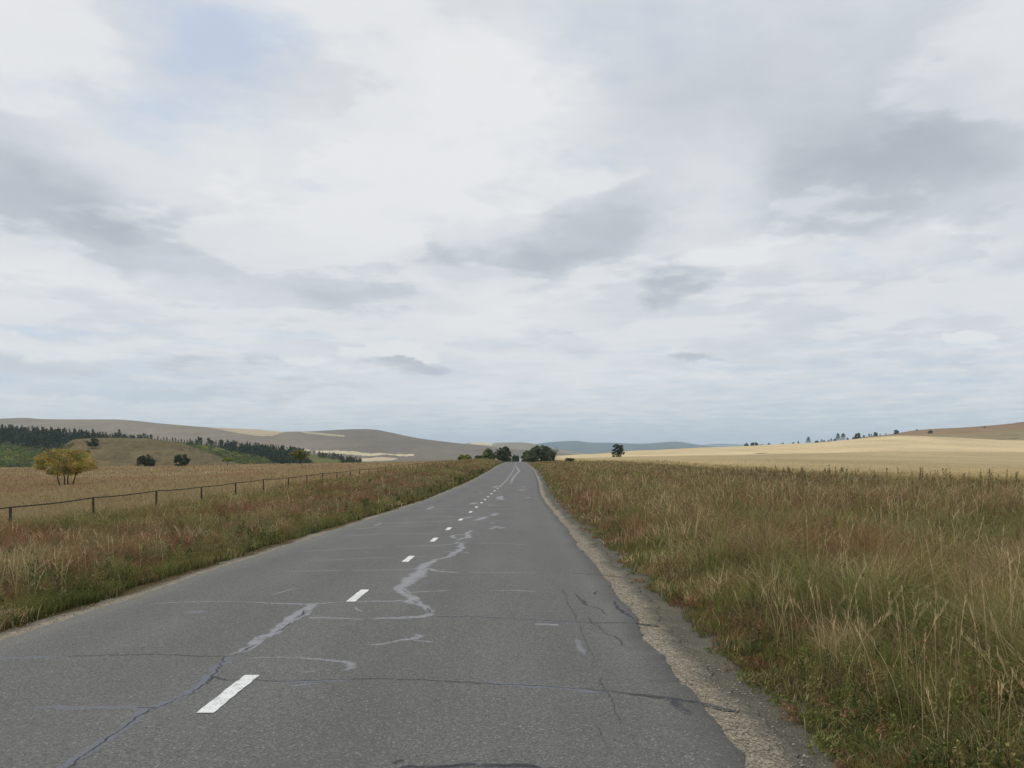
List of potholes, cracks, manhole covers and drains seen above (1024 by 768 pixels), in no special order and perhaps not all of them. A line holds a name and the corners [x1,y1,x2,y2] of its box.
crack [0,466,740,744]
